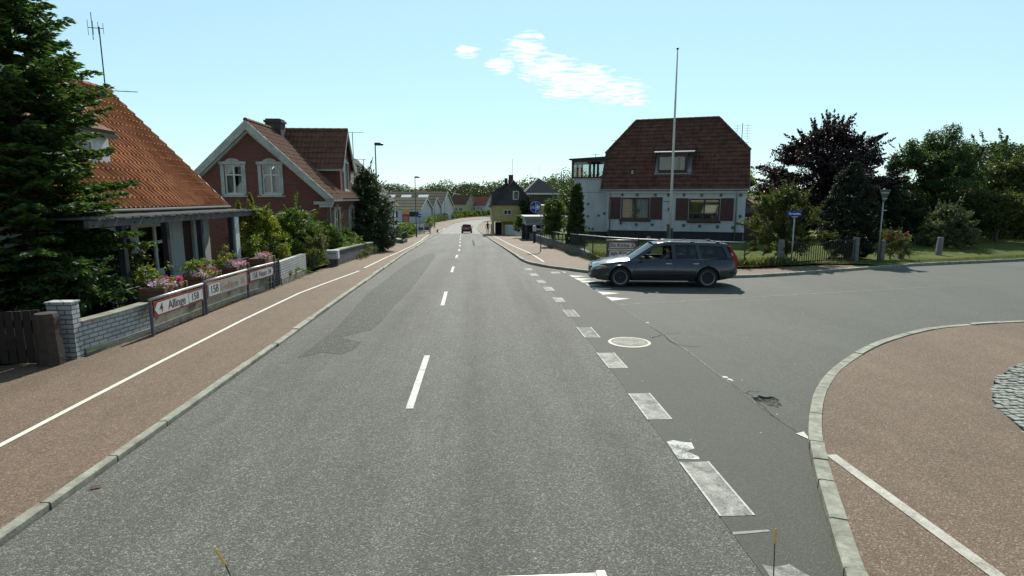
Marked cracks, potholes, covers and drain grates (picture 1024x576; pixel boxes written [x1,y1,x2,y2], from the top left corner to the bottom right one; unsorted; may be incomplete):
manhole cover [608,337,651,348]
pothole [751,395,782,408]
